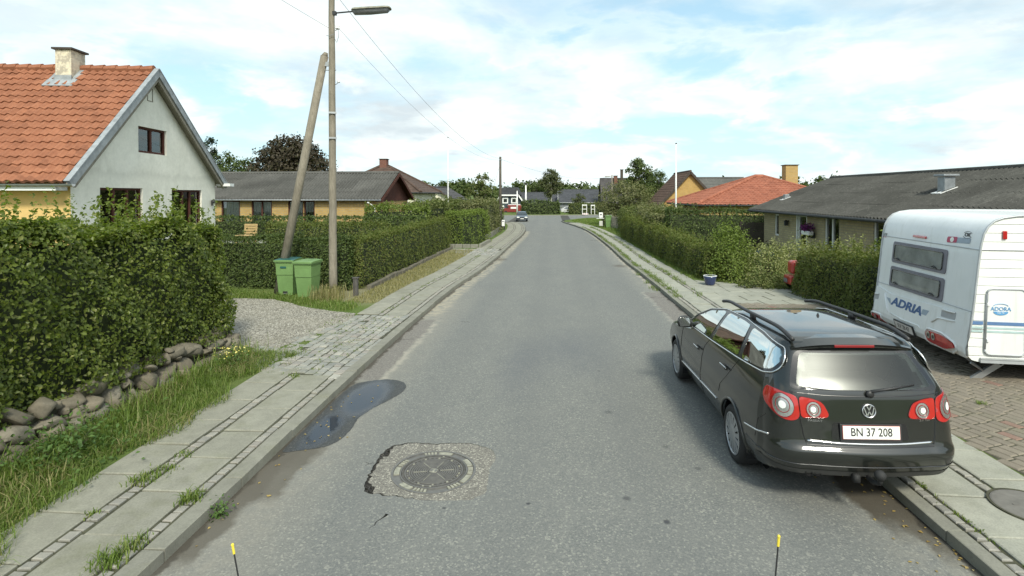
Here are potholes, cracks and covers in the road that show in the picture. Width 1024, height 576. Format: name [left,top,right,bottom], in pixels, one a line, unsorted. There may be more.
manhole cover [391,451,476,494]
manhole cover [986,488,1024,521]
